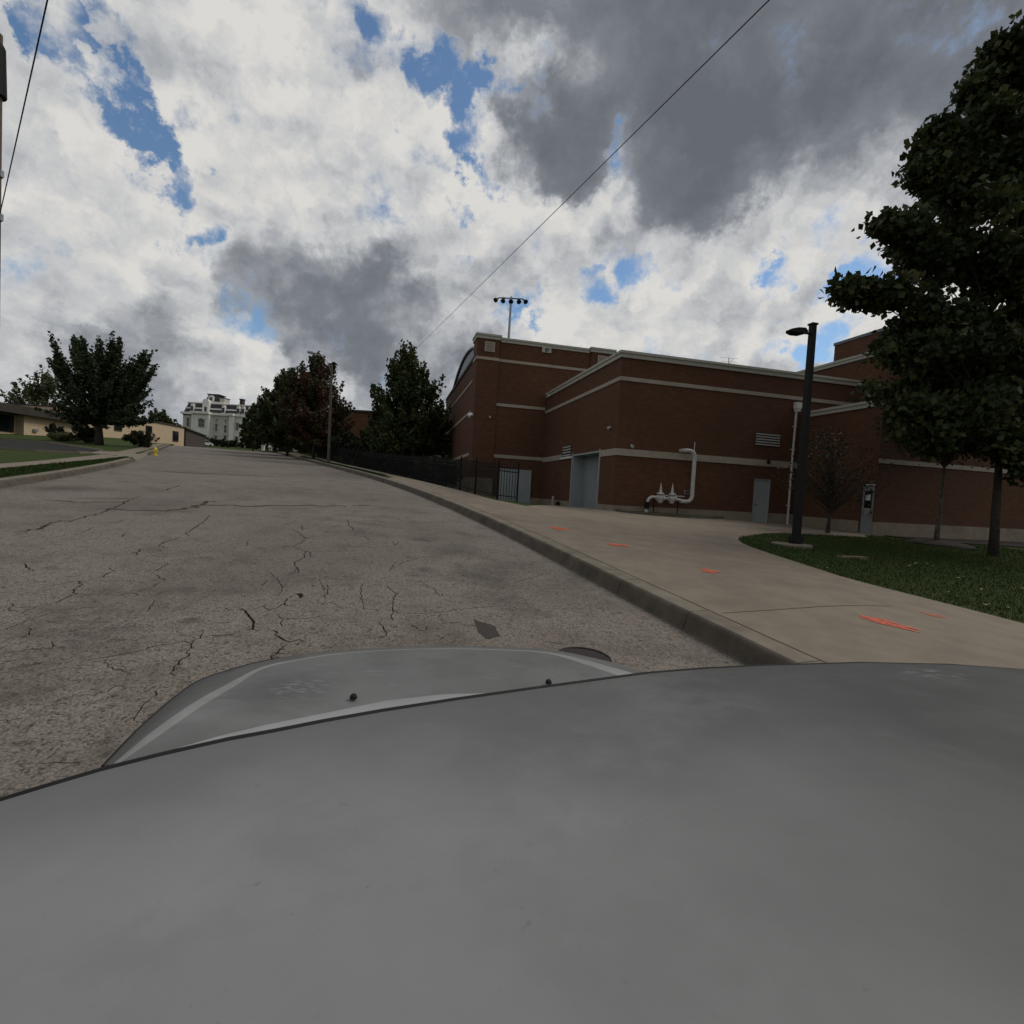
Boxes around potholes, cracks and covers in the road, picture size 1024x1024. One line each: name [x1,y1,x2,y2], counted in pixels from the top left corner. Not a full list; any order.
crack [0,471,504,764]
manhole cover [558,647,612,662]
